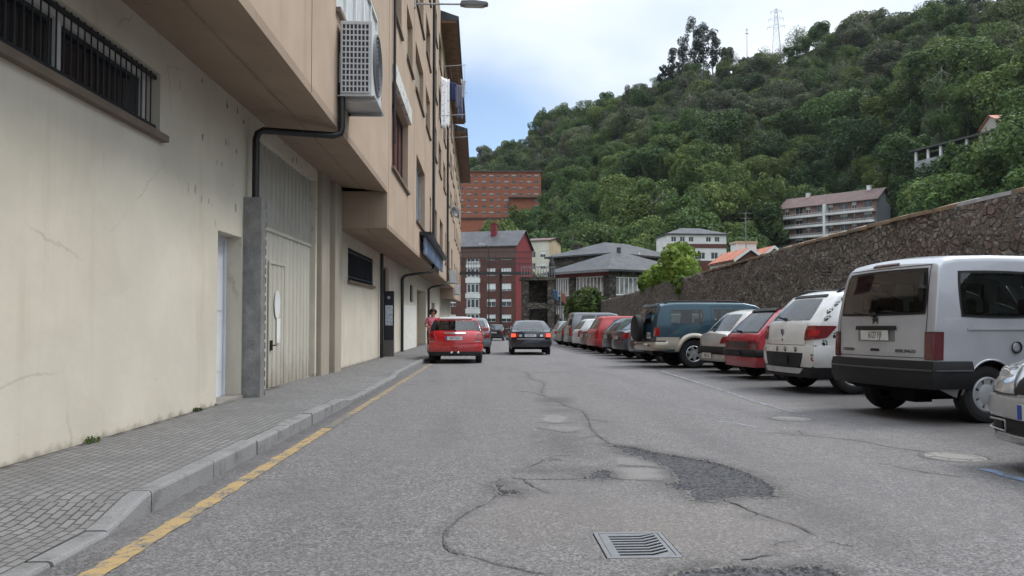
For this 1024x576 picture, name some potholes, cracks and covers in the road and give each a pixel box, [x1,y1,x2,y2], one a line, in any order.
crack [518,455,582,493]
crack [725,501,849,560]
drain grate [593,531,683,559]
manhole cover [916,451,996,463]
crack [516,372,610,444]
crack [443,478,540,573]
